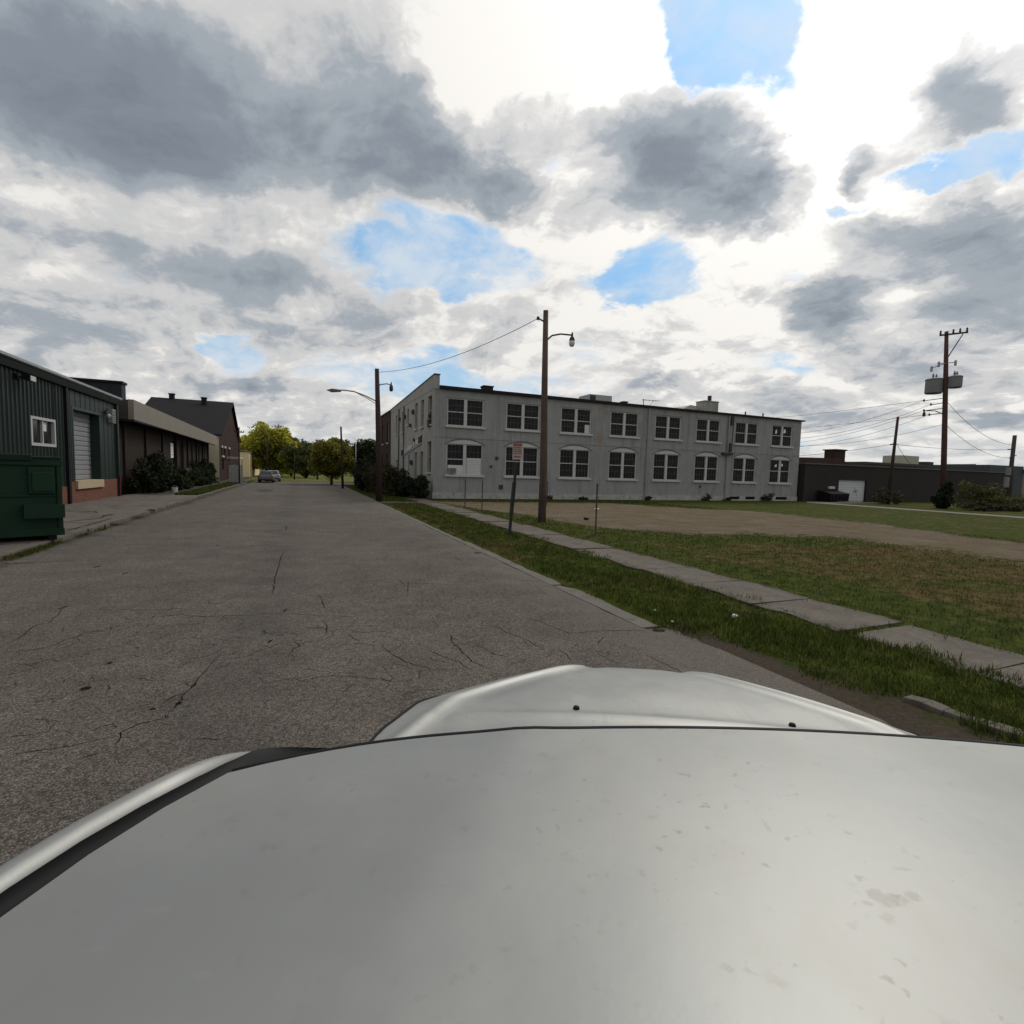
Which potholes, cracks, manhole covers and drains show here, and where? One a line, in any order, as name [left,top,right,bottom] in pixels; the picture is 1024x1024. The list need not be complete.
crack [255,526,326,593]
crack [1,558,642,760]
